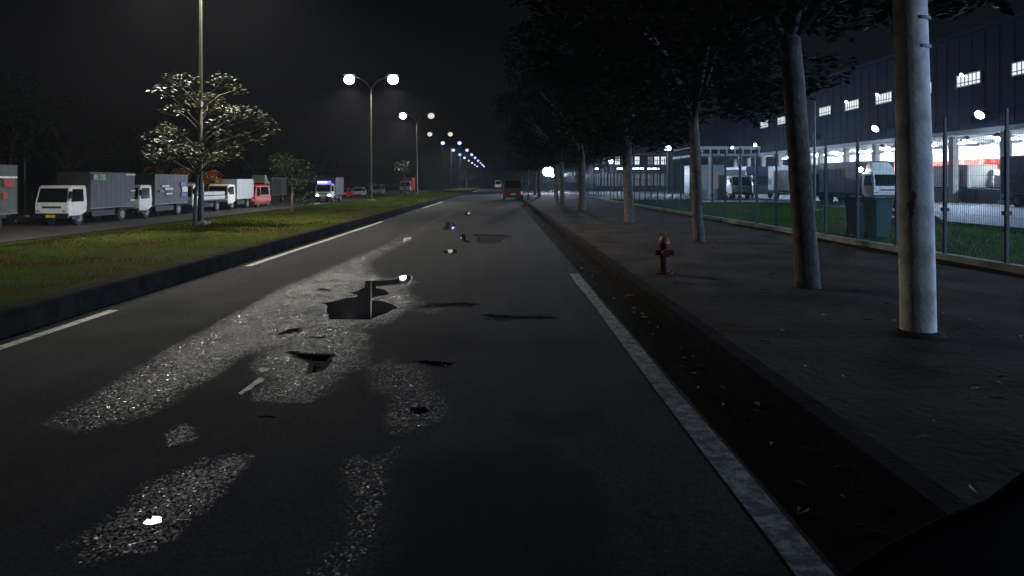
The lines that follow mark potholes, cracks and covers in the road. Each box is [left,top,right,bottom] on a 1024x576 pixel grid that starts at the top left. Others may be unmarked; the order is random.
pothole [480,314,557,322]
pothole [413,360,455,368]
pothole [320,275,413,320]
pothole [284,351,335,374]
pothole [473,234,511,244]
